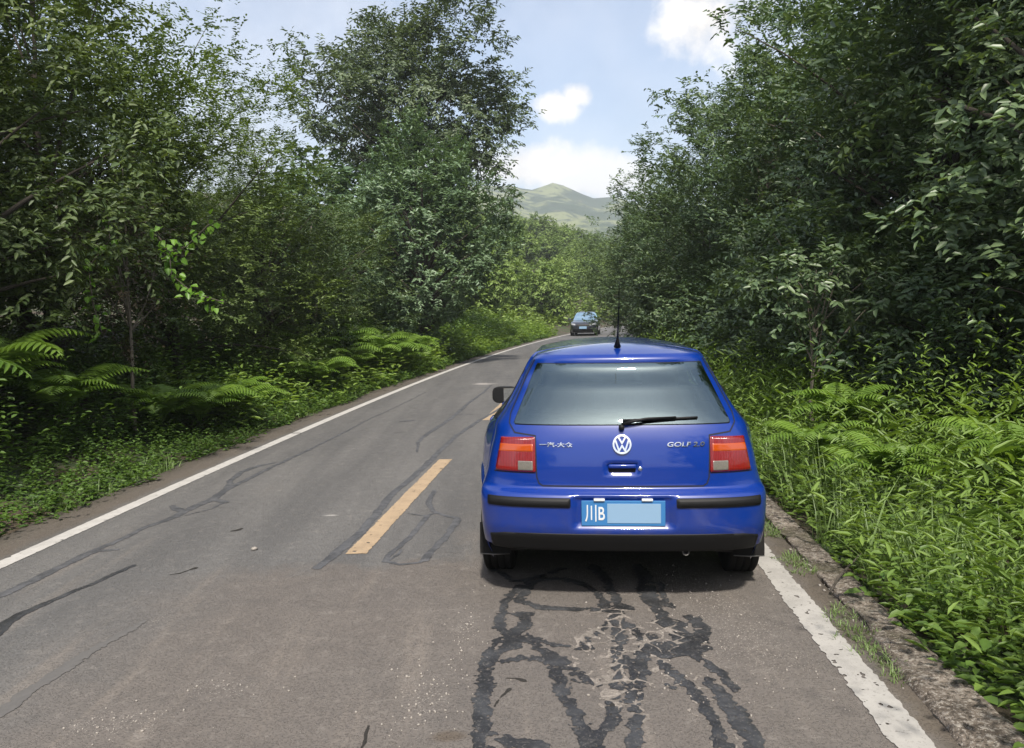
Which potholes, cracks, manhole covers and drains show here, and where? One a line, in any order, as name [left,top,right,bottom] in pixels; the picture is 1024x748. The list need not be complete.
crack [0,620,146,717]
